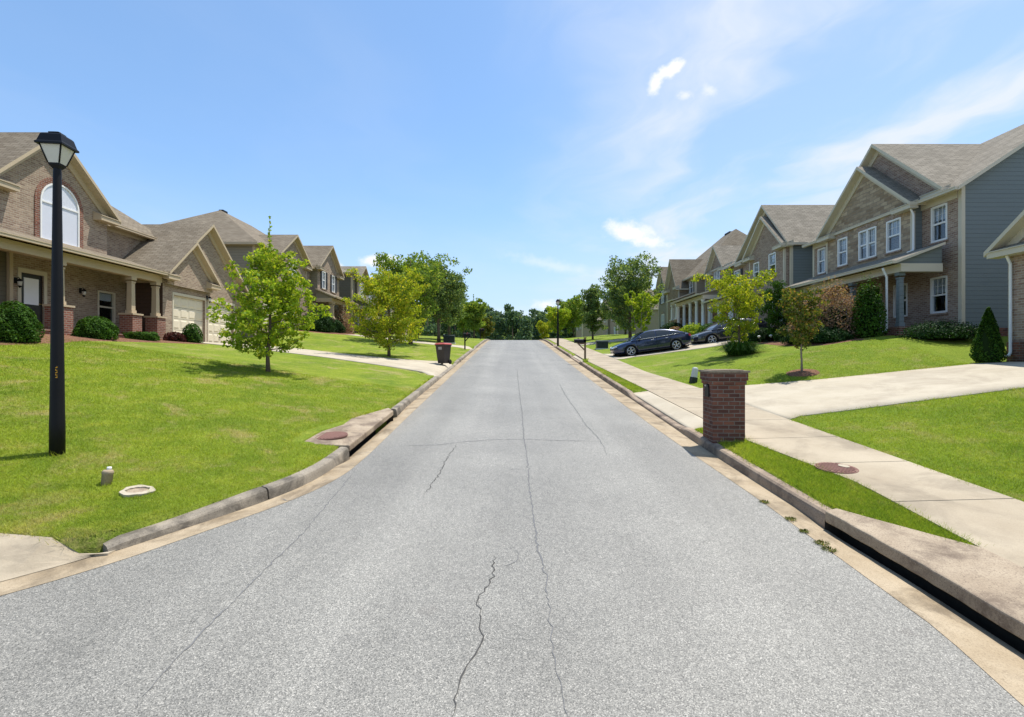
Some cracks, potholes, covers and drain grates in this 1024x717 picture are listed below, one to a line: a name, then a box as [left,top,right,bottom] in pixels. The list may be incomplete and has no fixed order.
manhole cover [815,462,859,474]
crack [355,439,565,493]
manhole cover [315,431,348,440]
drain grate [825,508,1024,654]
crack [452,553,519,716]
drain grate [306,408,393,459]
